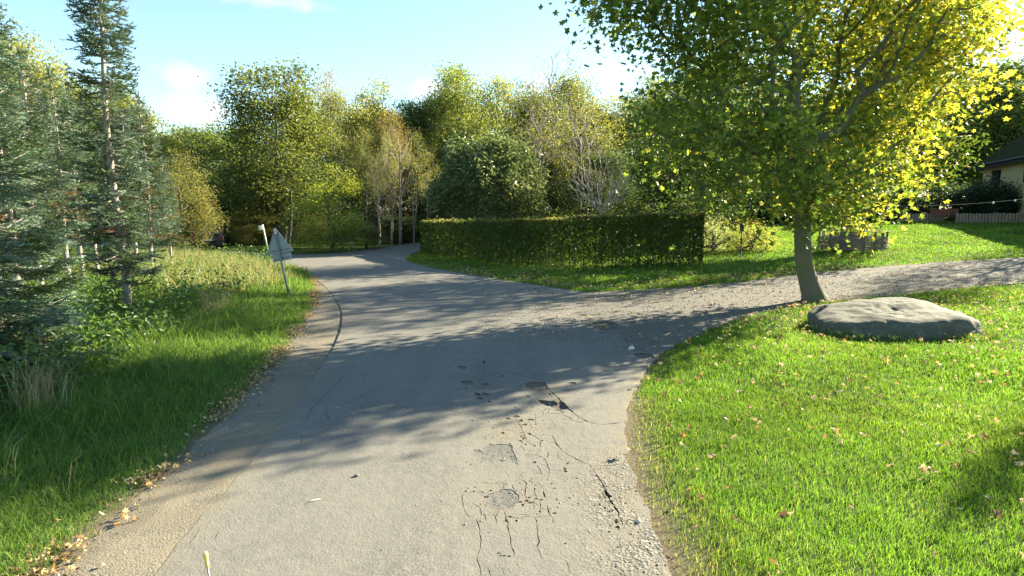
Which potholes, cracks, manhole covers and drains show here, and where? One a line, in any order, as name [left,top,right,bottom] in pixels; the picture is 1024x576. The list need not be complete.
pothole [474,444,517,463]
pothole [485,489,519,510]
pothole [538,400,569,411]
pothole [525,382,548,391]
crack [461,372,625,576]
